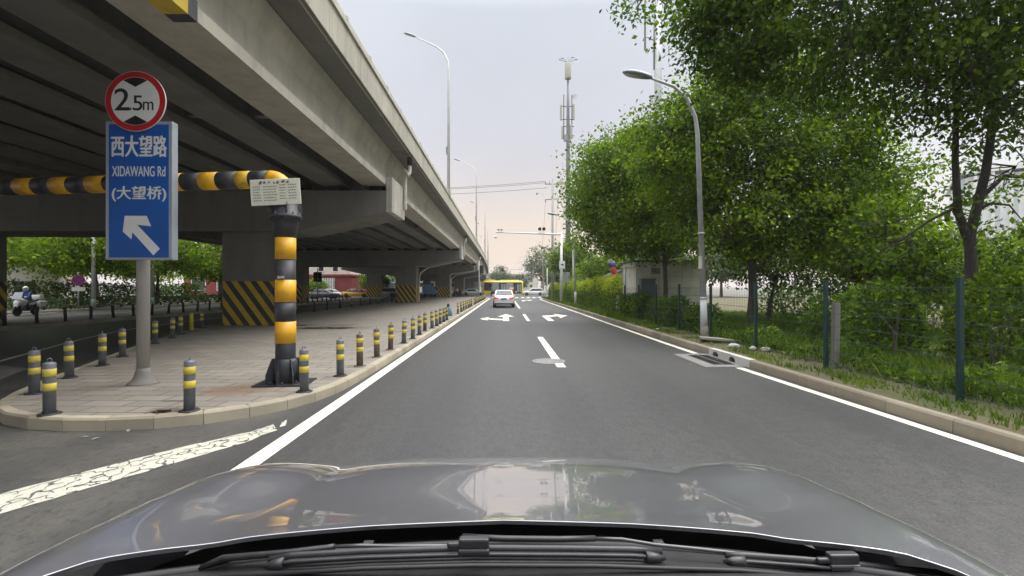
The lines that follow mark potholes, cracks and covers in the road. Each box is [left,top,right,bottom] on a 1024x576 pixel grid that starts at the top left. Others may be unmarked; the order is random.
drain grate [674,354,747,367]
